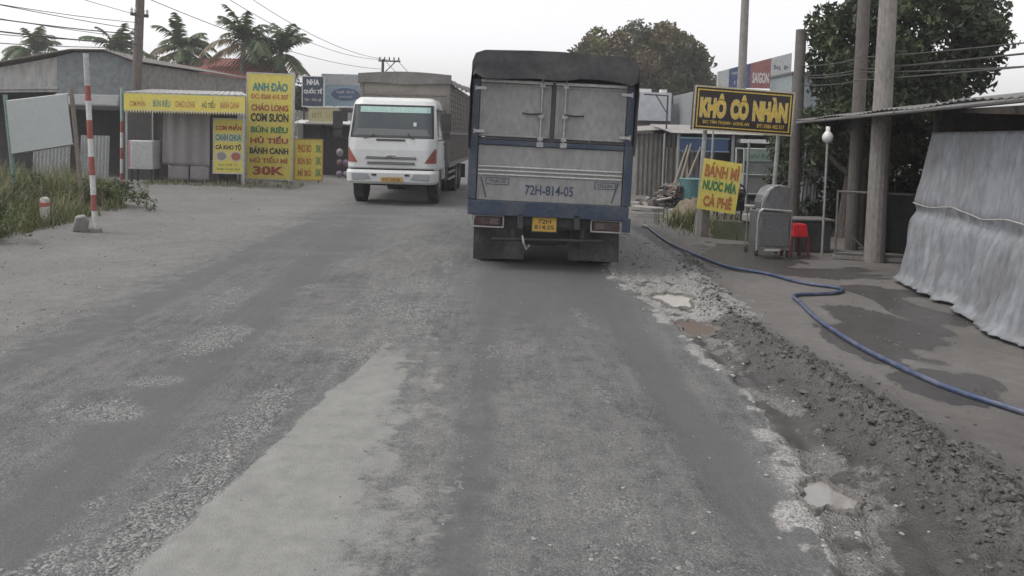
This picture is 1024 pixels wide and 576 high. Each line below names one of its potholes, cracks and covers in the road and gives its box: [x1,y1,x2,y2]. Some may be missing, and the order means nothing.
pothole [645,291,697,310]
pothole [672,319,722,339]
pothole [794,475,867,517]
